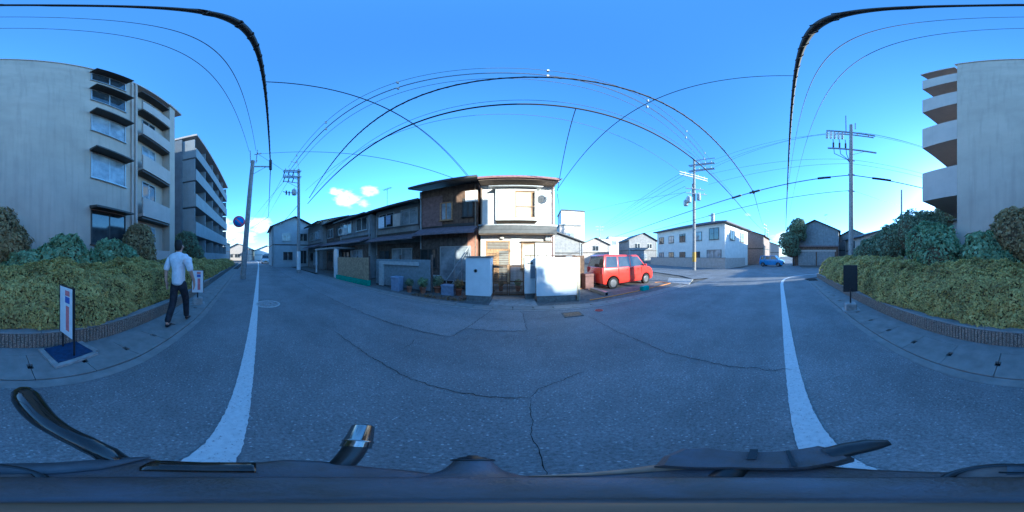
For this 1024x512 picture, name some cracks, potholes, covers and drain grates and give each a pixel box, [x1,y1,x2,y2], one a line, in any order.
crack [590,317,785,371]
crack [305,331,582,474]
